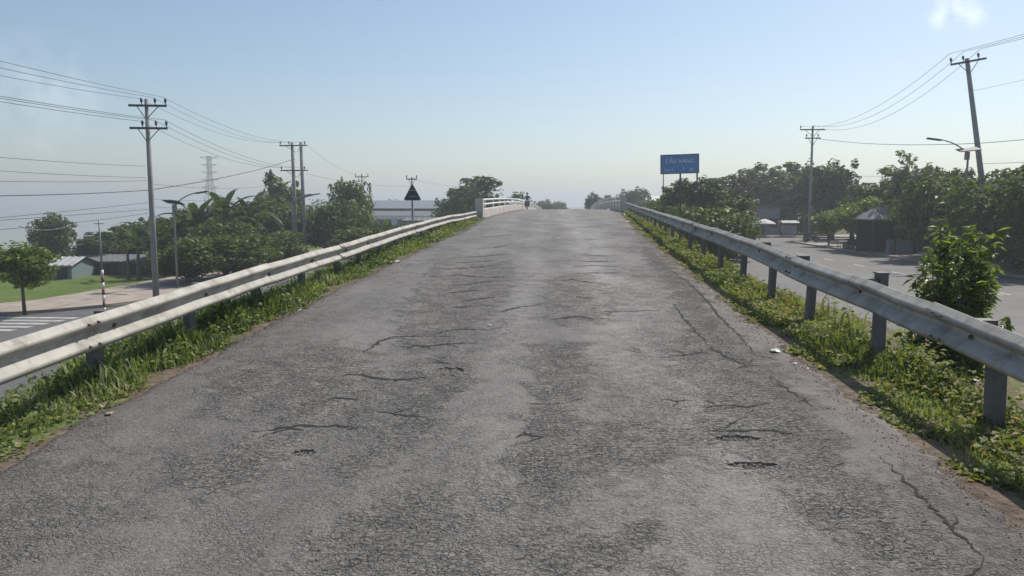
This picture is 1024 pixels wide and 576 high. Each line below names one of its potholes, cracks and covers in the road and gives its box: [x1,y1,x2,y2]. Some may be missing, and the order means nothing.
crack [151,226,860,494]
pothole [725,462,779,470]
pothole [291,449,317,457]
crack [806,458,985,576]
